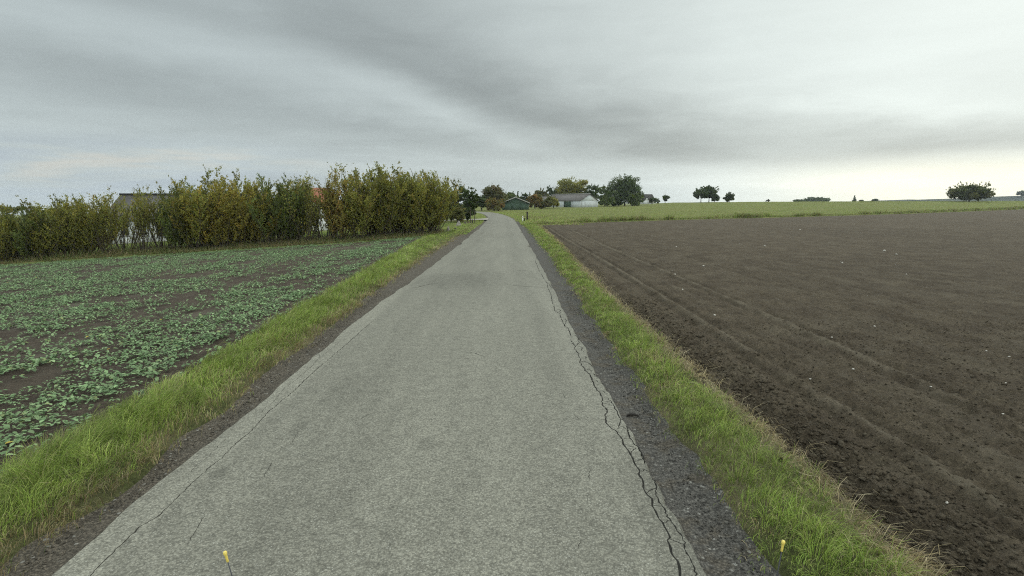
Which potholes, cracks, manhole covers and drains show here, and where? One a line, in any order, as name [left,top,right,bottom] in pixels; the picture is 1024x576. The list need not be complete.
crack [507,262,698,576]
crack [90,325,368,576]
